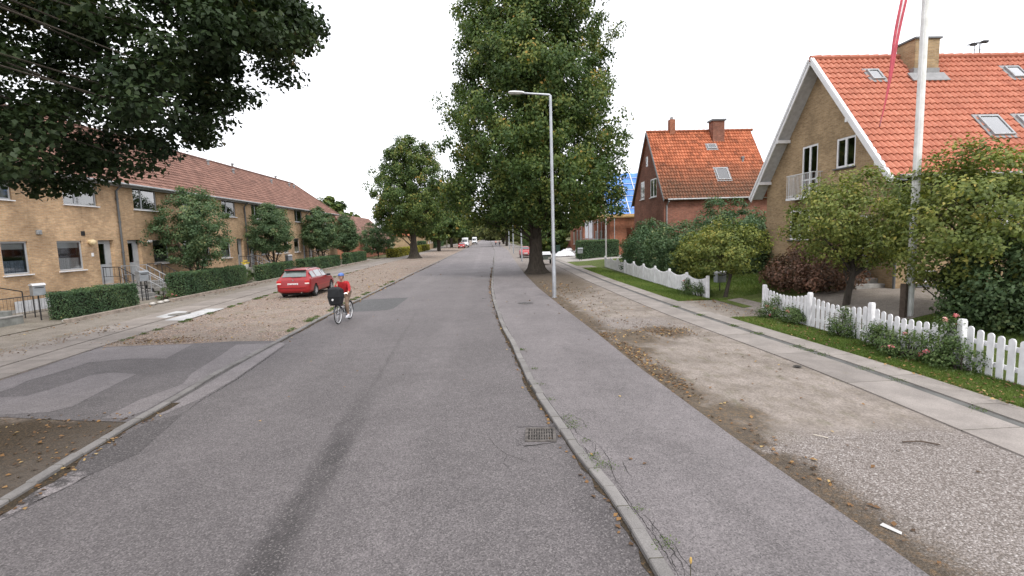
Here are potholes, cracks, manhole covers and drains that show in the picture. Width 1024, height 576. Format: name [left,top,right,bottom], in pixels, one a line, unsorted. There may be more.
crack [556,411,628,480]
drain grate [516,425,566,446]
